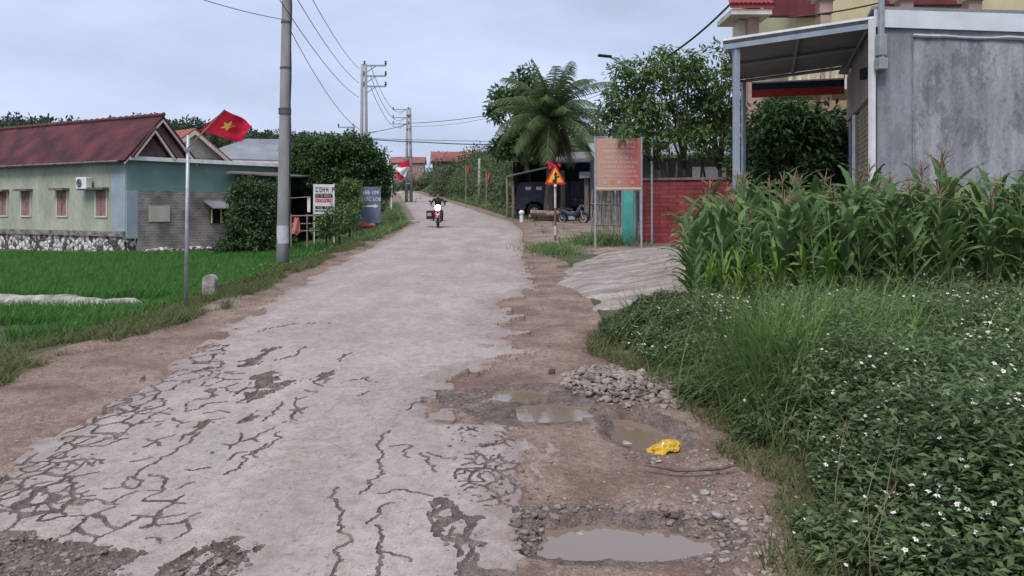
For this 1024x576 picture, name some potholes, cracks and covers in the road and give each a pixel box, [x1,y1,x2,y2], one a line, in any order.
pothole [153,536,266,576]
crack [326,426,540,576]
crack [337,352,378,396]
pothole [434,382,602,429]
pothole [510,504,759,570]
crack [0,344,324,543]
crack [257,322,331,360]
crack [406,395,436,410]
pothole [594,404,702,455]
